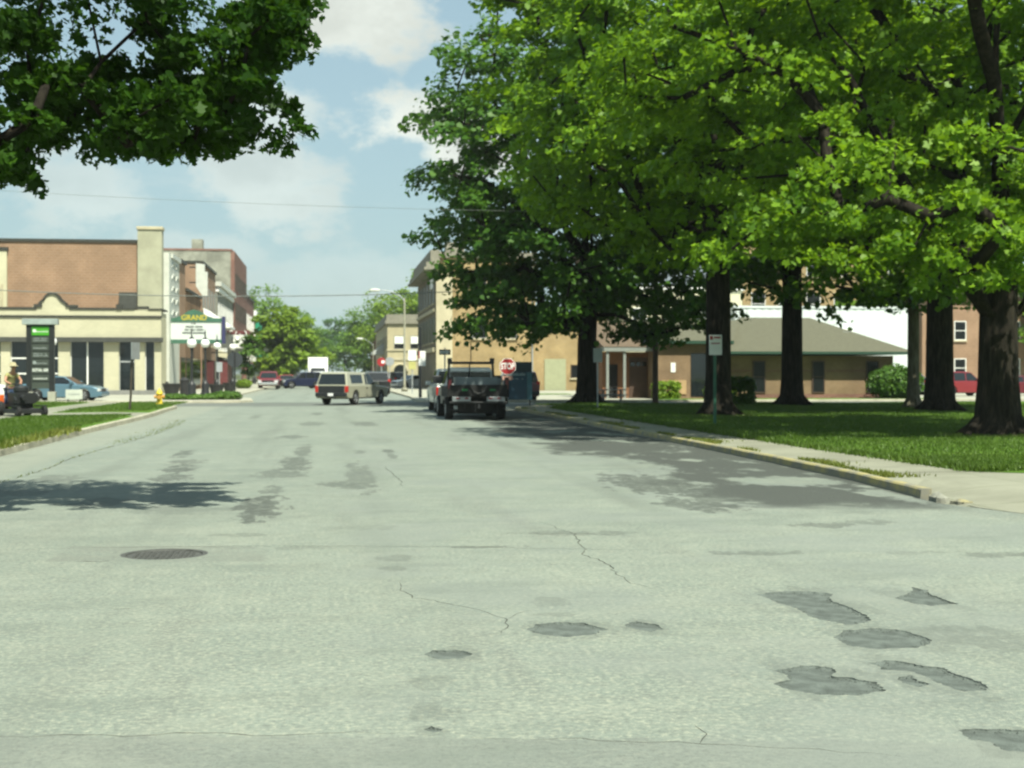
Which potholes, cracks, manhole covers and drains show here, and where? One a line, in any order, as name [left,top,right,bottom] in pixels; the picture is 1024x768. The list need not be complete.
pothole [869,660,988,692]
pothole [896,587,958,606]
crack [400,583,532,637]
manhole cover [120,549,208,560]
pothole [833,628,932,649]
pothole [625,621,662,632]
pothole [527,622,607,637]
pothole [772,665,886,695]
pothole [758,591,871,625]
pothole [958,729,1024,752]
